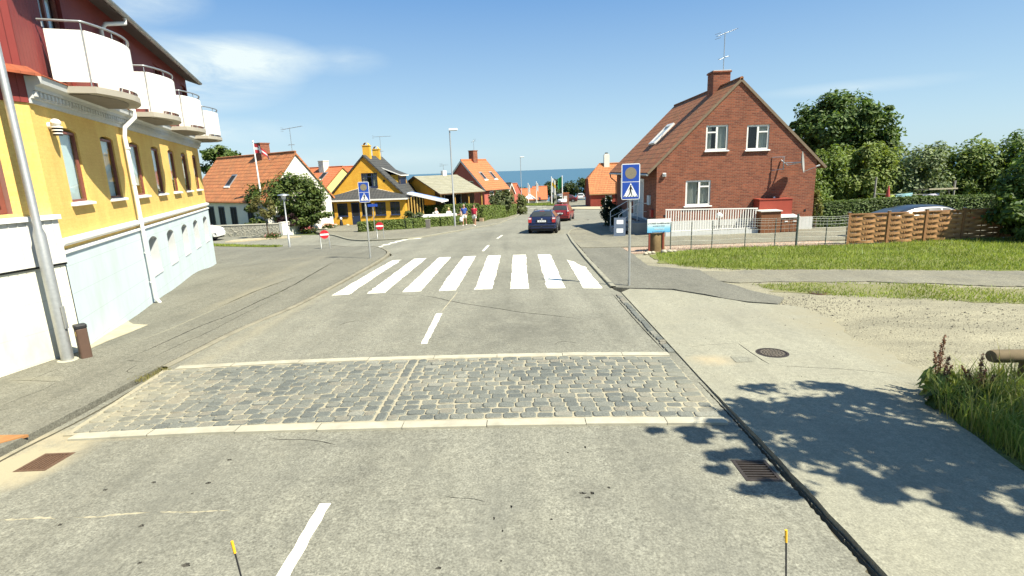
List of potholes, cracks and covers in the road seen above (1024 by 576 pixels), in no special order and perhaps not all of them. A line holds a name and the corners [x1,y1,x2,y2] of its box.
crack [422,295,578,319]
manhole cover [755,348,789,358]
drain grate [731,460,783,481]
drain grate [13,452,76,472]
